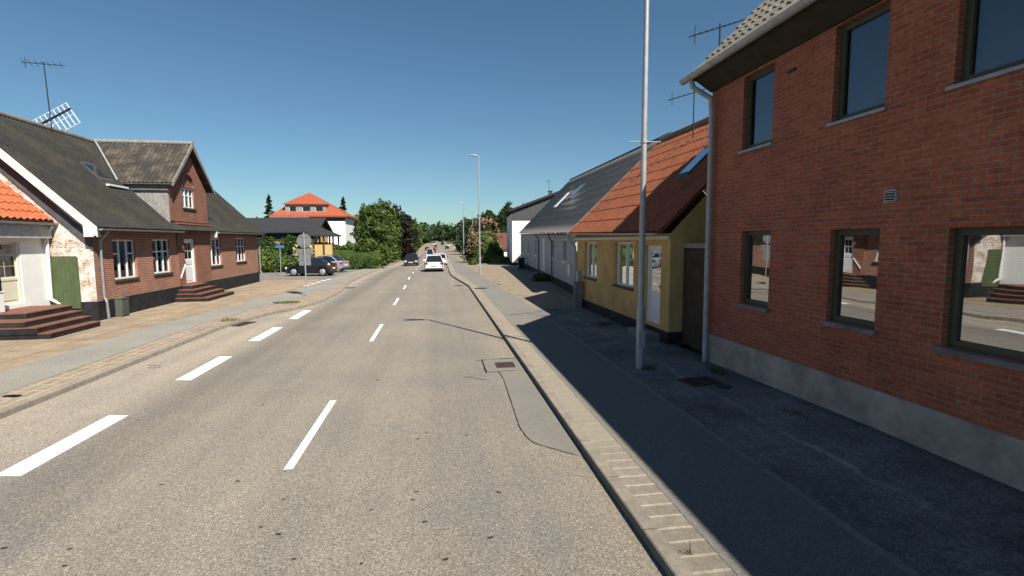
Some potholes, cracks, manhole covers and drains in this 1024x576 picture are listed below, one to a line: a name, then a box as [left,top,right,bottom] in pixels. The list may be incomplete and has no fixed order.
manhole cover [677,376,723,387]
